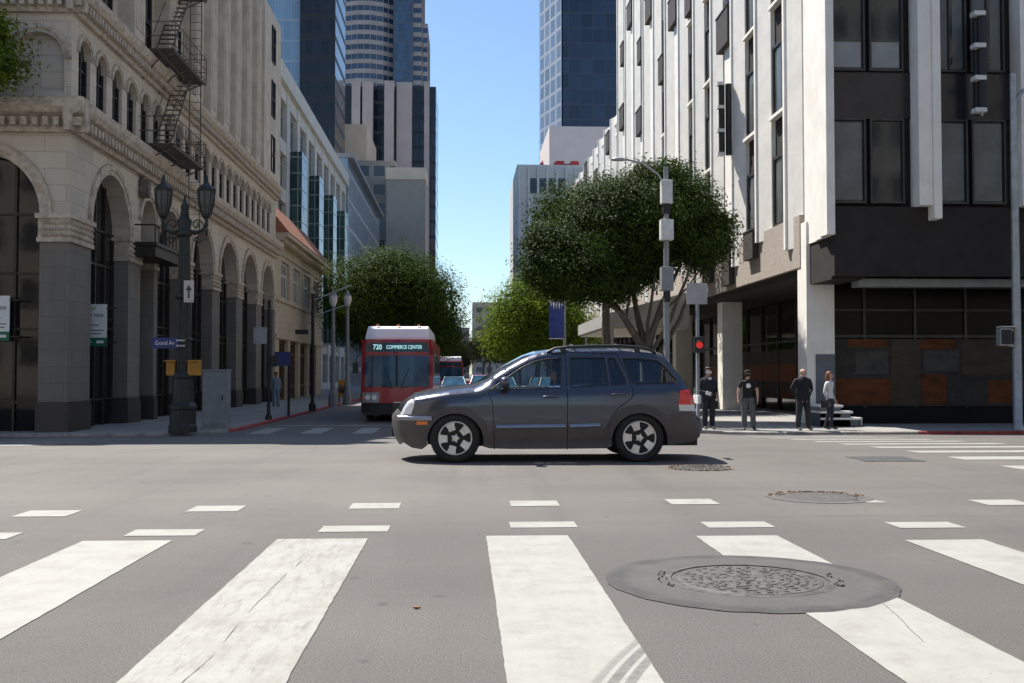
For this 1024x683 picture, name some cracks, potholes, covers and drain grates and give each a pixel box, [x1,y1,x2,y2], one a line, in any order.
crack [184,562,300,680]
manhole cover [606,555,901,613]
manhole cover [766,490,873,503]
